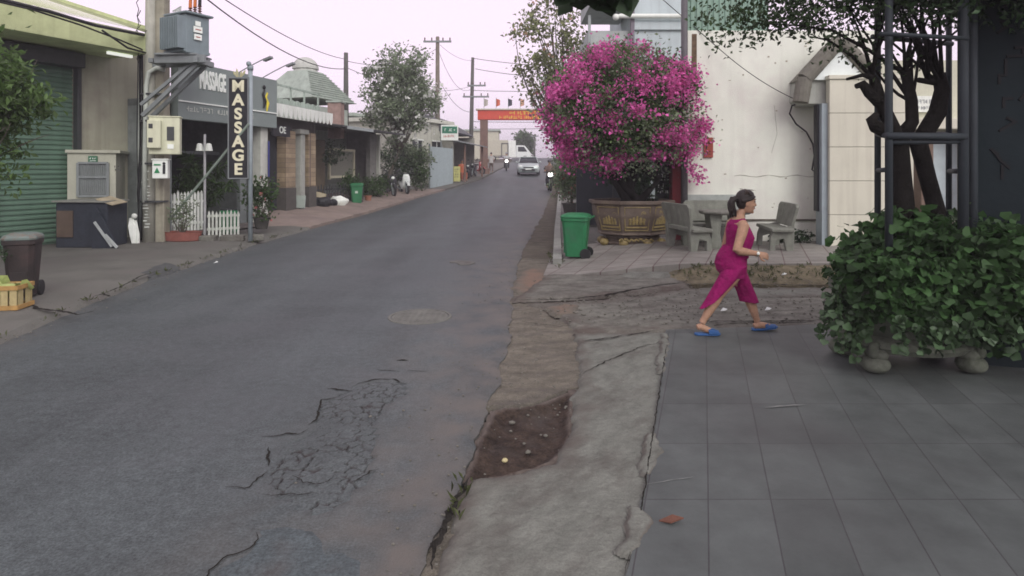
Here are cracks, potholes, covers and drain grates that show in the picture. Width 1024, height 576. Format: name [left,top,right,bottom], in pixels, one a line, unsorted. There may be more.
crack [206,359,415,576]
crack [528,322,690,576]
pothole [463,389,576,485]
manhole cover [388,309,452,325]
crack [527,281,688,300]
